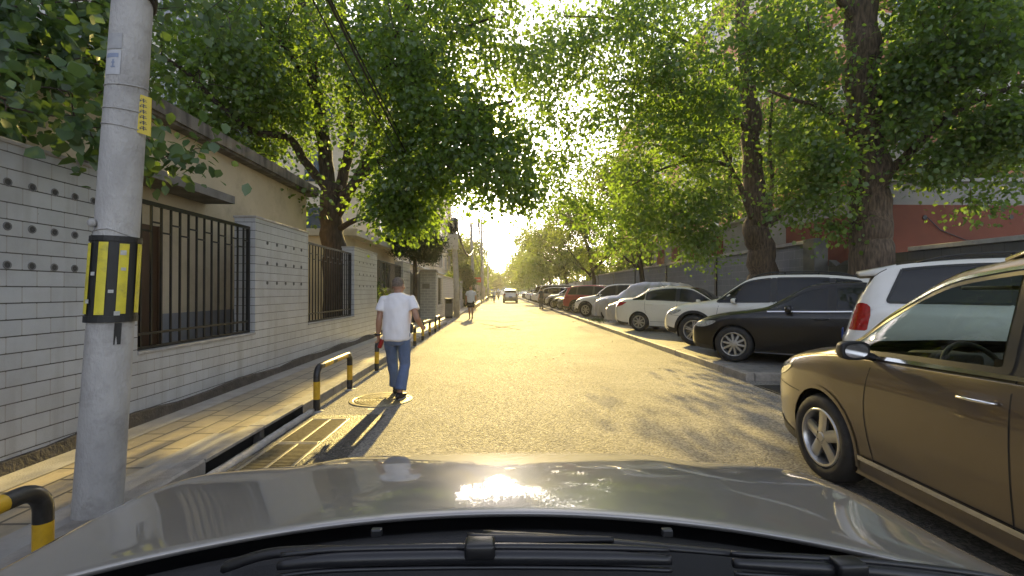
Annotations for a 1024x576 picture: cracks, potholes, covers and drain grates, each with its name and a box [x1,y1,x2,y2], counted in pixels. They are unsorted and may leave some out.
drain grate [276,418,350,443]
drain grate [235,442,321,471]
manhole cover [348,392,413,407]
